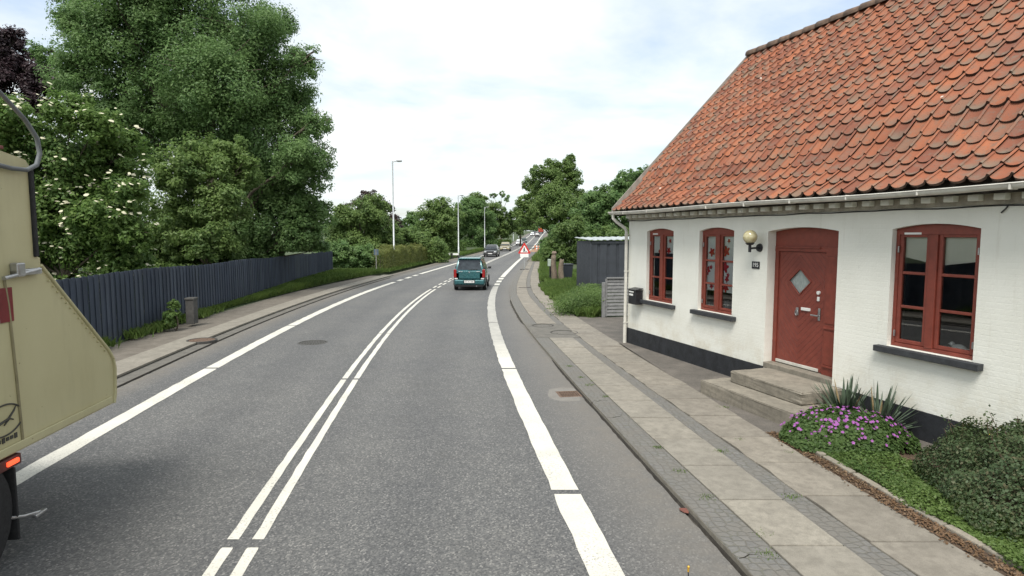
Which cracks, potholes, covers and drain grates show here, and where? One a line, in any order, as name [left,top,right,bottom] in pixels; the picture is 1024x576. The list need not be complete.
manhole cover [186,337,218,345]
